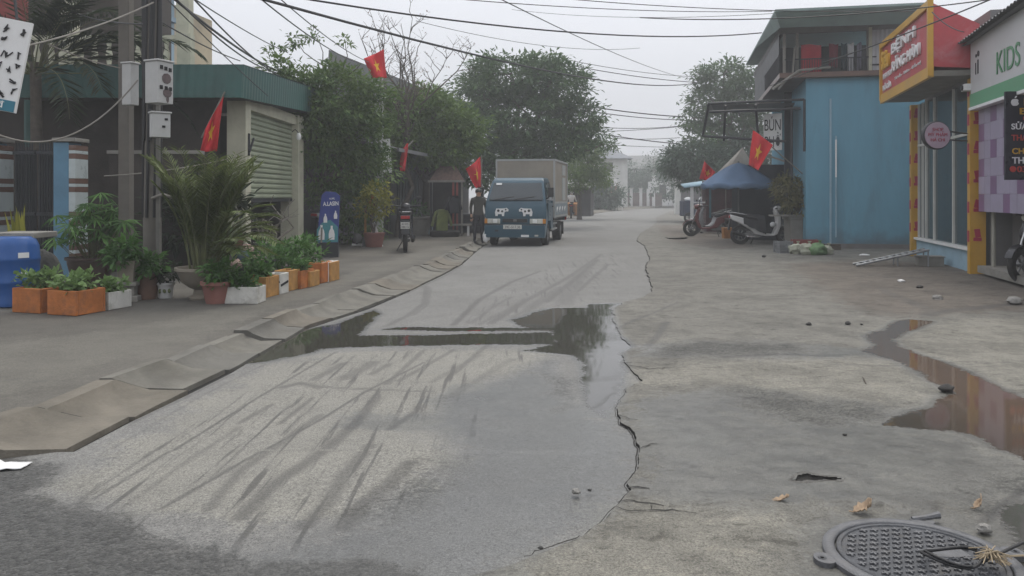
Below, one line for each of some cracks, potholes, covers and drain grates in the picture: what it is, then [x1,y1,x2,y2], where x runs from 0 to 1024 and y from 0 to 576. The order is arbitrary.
manhole cover [813,511,1024,576]
crack [524,237,696,557]
pothole [787,471,845,483]
